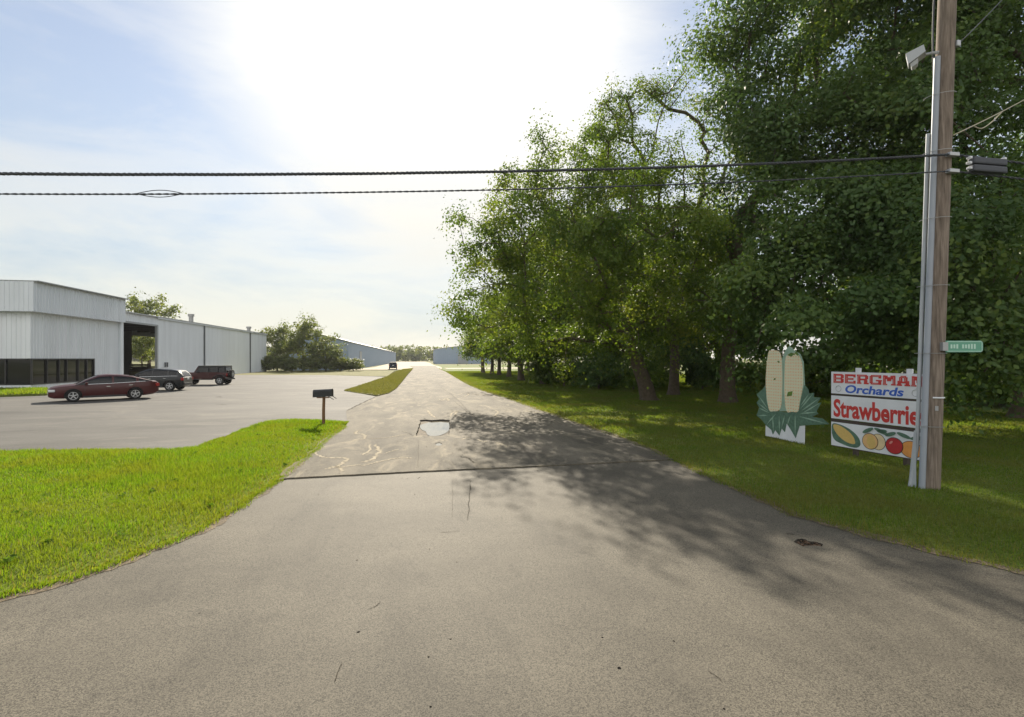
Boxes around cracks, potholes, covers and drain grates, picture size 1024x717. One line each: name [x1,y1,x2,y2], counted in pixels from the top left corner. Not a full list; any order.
crack [314,389,507,471]
pothole [416,419,451,436]
